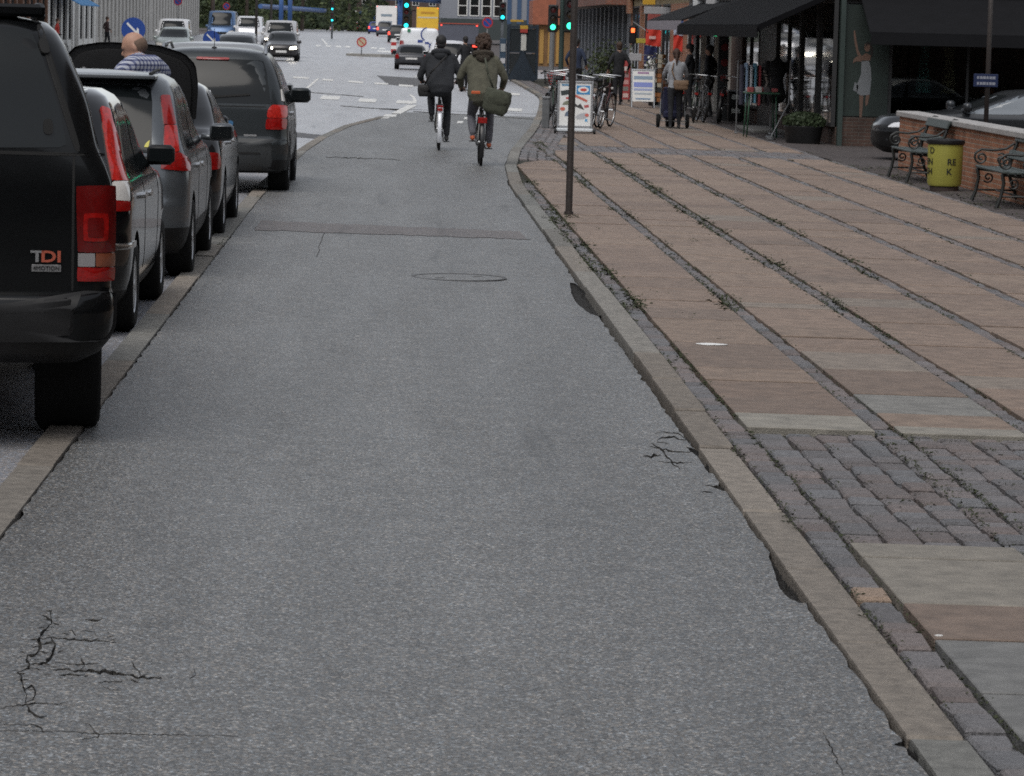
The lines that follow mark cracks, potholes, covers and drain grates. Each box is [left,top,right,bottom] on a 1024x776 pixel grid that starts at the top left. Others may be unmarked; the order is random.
manhole cover [411,273,507,282]
pothole [768,549,808,608]
crack [0,609,238,740]
pothole [570,283,601,319]
crack [644,431,729,495]
